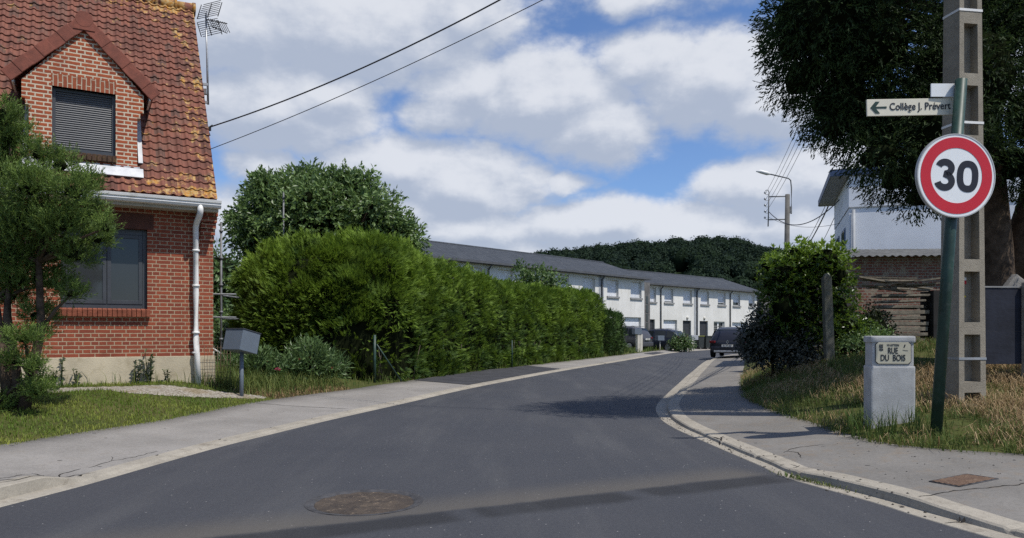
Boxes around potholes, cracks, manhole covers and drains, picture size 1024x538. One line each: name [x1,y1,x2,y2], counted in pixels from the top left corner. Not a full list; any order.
crack [5,451,156,482]
manhole cover [929,474,999,487]
manhole cover [304,489,423,516]
